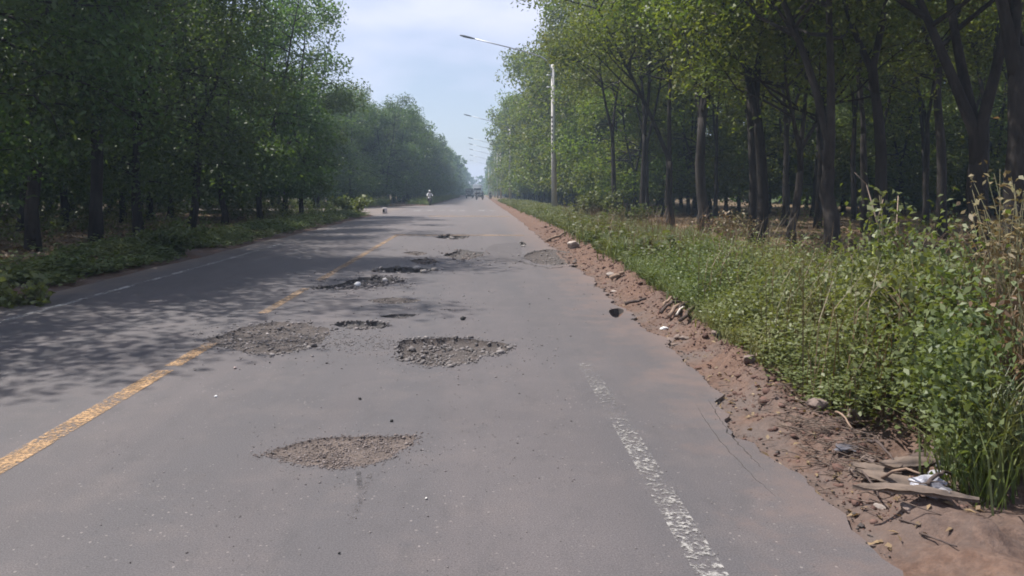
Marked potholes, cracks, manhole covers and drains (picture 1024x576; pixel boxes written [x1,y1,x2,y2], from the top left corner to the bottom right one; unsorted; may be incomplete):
pothole [253,432,429,471]
pothole [330,319,392,330]
pothole [372,265,438,273]
crack [698,401,774,495]
pothole [441,249,490,261]
pothole [300,274,405,290]
pothole [195,320,341,358]
pothole [388,335,517,368]
